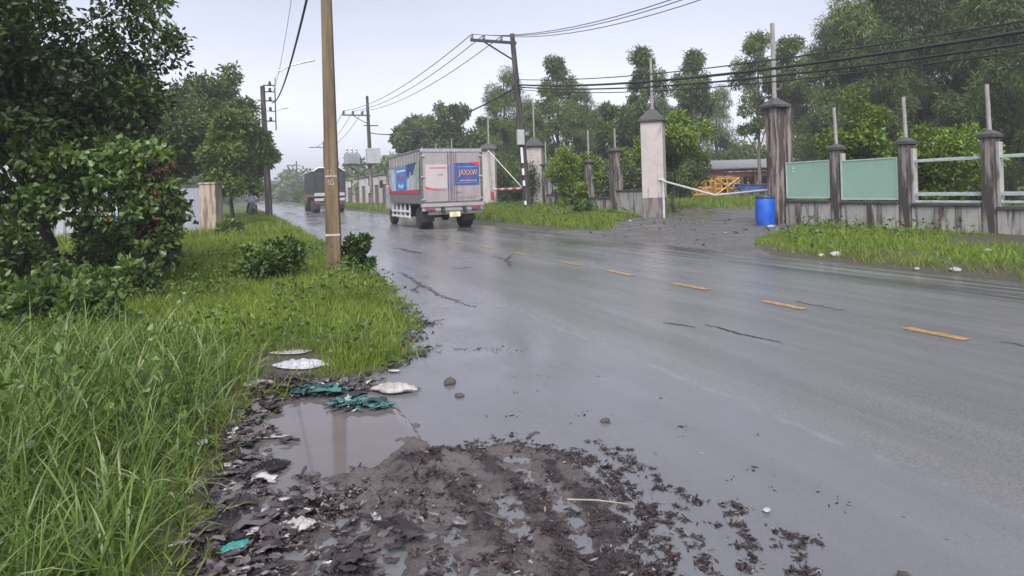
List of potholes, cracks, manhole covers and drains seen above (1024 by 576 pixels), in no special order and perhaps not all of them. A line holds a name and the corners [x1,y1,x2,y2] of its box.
crack [670,323,781,343]
